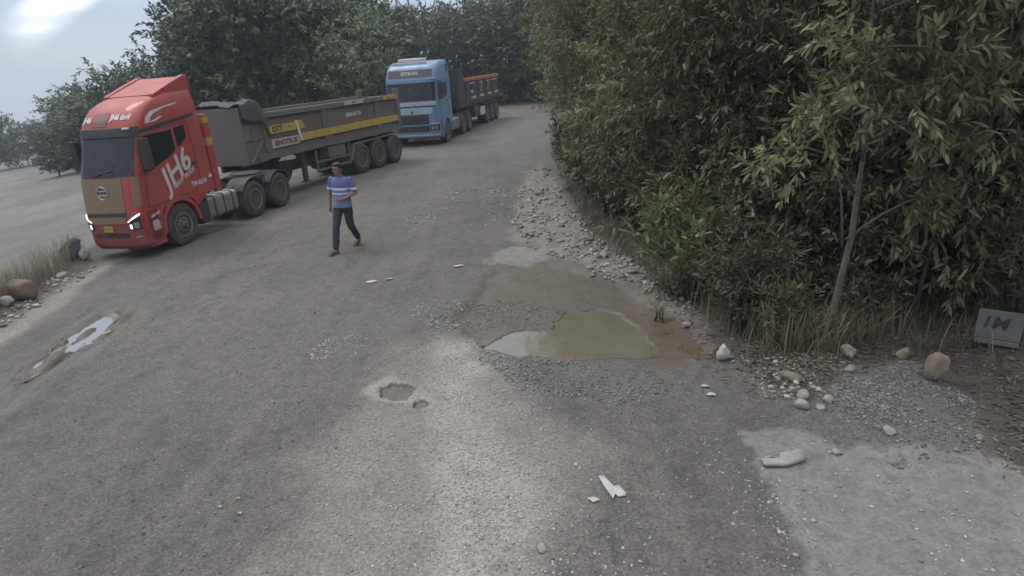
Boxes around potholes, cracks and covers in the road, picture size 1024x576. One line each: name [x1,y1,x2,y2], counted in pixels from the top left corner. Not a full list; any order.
pothole [405,396,438,413]
pothole [473,306,663,363]
pothole [12,310,122,385]
pothole [371,379,425,405]
